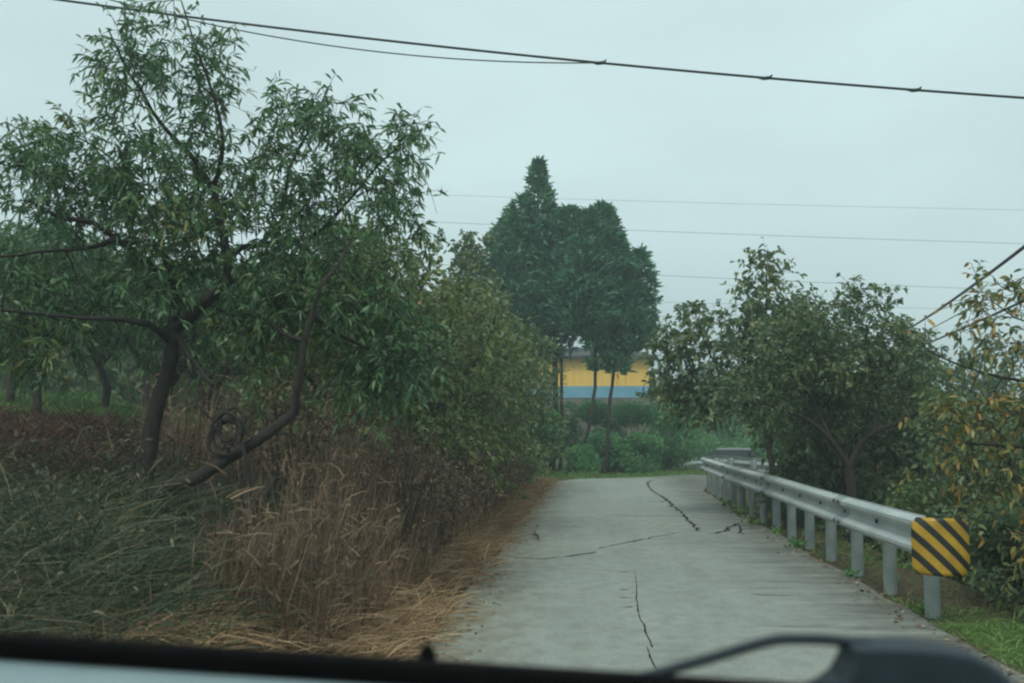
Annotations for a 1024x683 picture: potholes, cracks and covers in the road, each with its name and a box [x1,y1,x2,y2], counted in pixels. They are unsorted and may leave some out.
crack [712,523,758,534]
crack [502,533,674,559]
crack [617,571,656,668]
